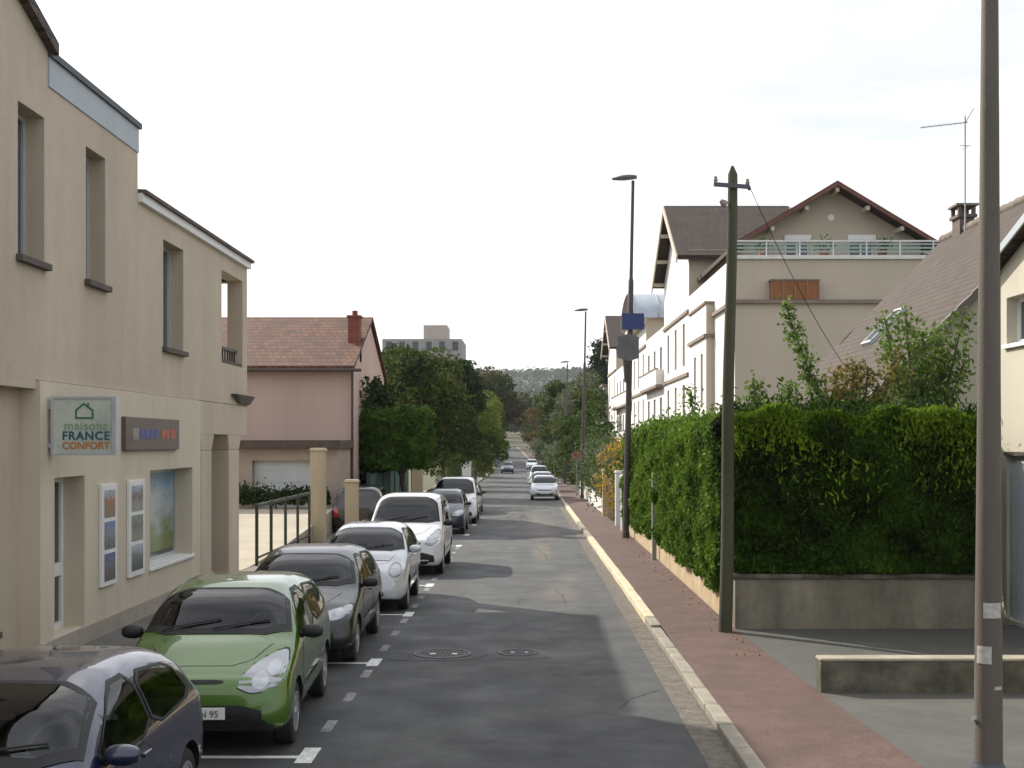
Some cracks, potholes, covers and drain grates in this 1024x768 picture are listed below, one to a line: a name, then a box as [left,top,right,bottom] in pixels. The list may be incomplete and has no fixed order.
manhole cover [413,648,472,659]
